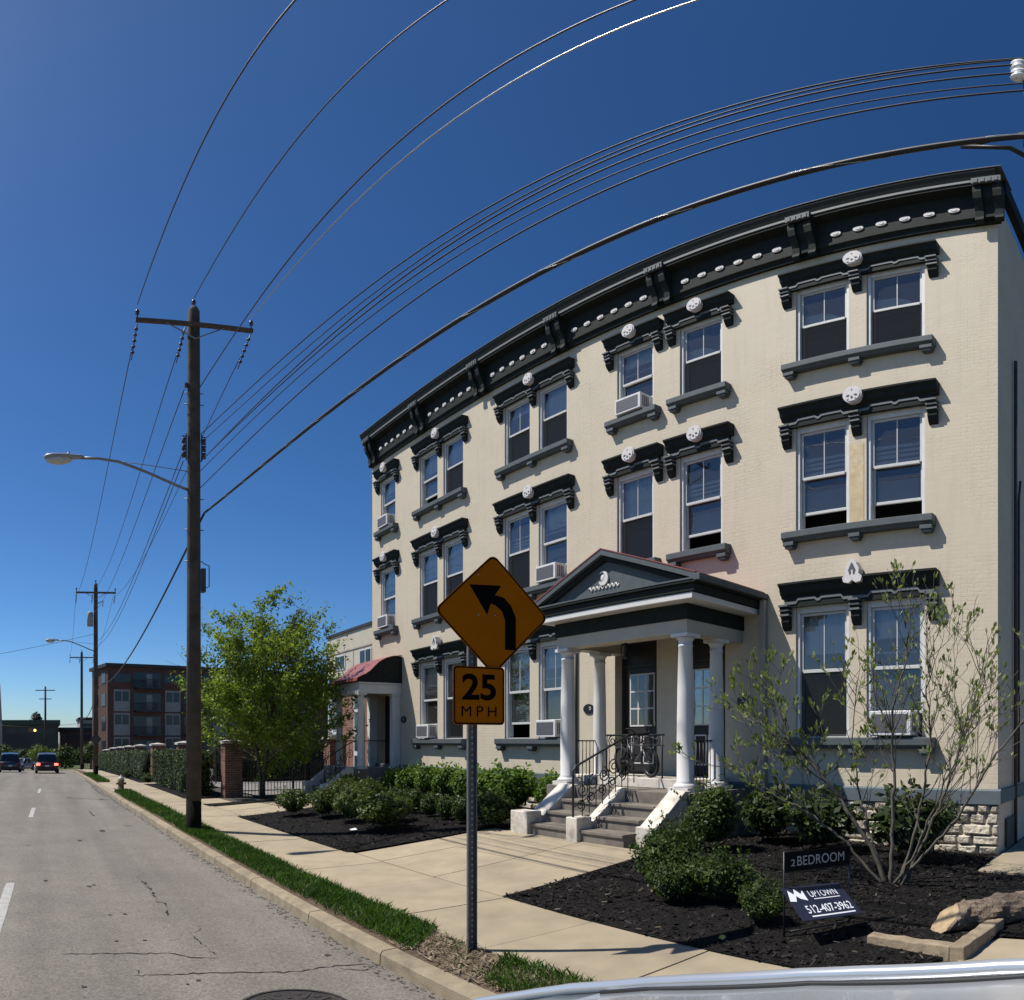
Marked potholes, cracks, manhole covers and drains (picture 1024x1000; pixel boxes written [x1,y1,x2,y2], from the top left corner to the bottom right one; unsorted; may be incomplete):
manhole cover [243,989,347,1000]
crack [68,932,381,976]
